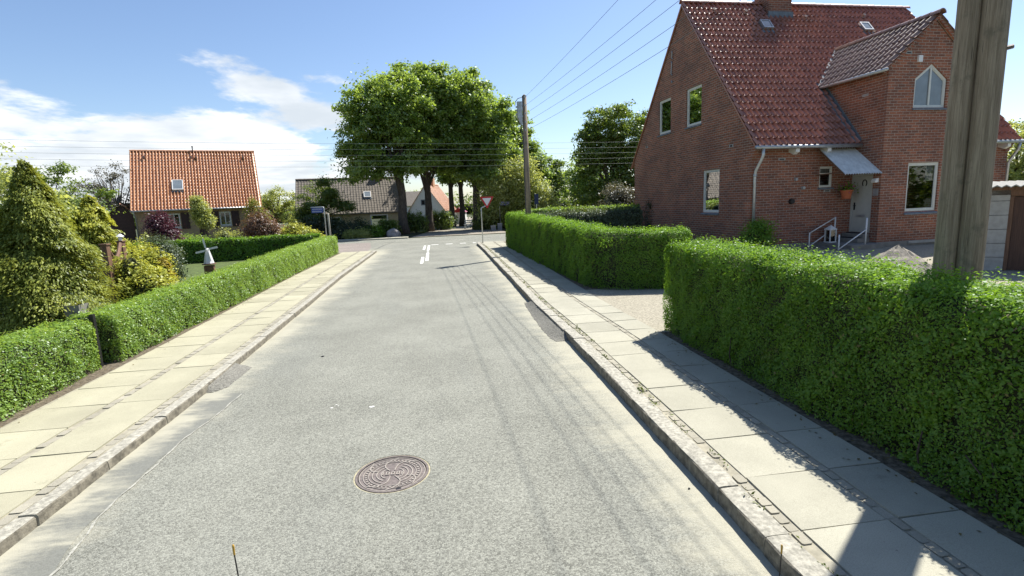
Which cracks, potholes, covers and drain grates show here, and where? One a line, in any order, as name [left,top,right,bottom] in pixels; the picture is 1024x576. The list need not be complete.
manhole cover [353,455,431,494]
